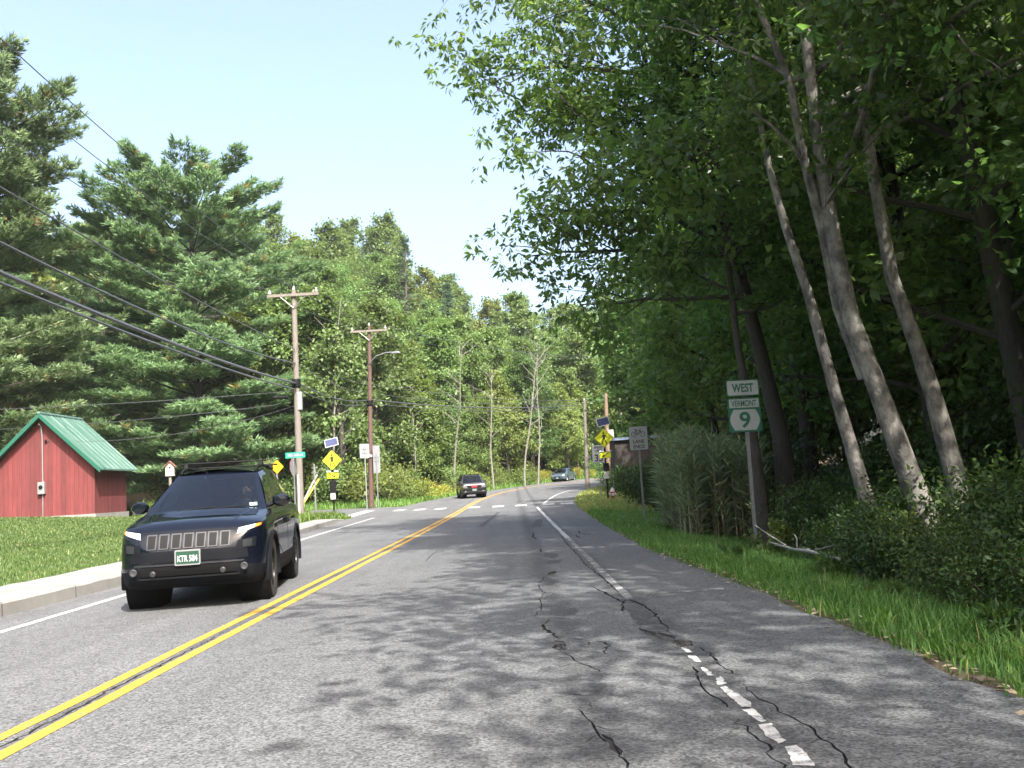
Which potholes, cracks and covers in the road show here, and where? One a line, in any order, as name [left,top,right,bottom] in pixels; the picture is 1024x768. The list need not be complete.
crack [535,579,611,672]
crack [563,531,671,633]
crack [578,700,630,768]
crack [687,647,852,768]
